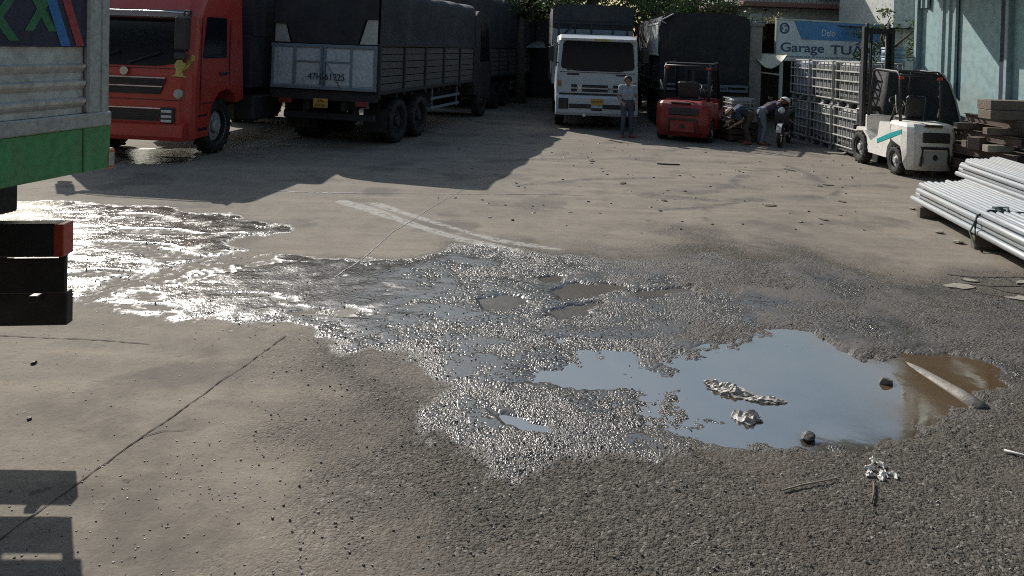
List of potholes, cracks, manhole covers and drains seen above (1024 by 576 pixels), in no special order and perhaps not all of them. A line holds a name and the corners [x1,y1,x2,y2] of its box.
pothole [540,297,613,320]
pothole [545,279,637,300]
pothole [506,318,1024,465]
pothole [478,402,560,437]
pothole [473,290,535,311]
